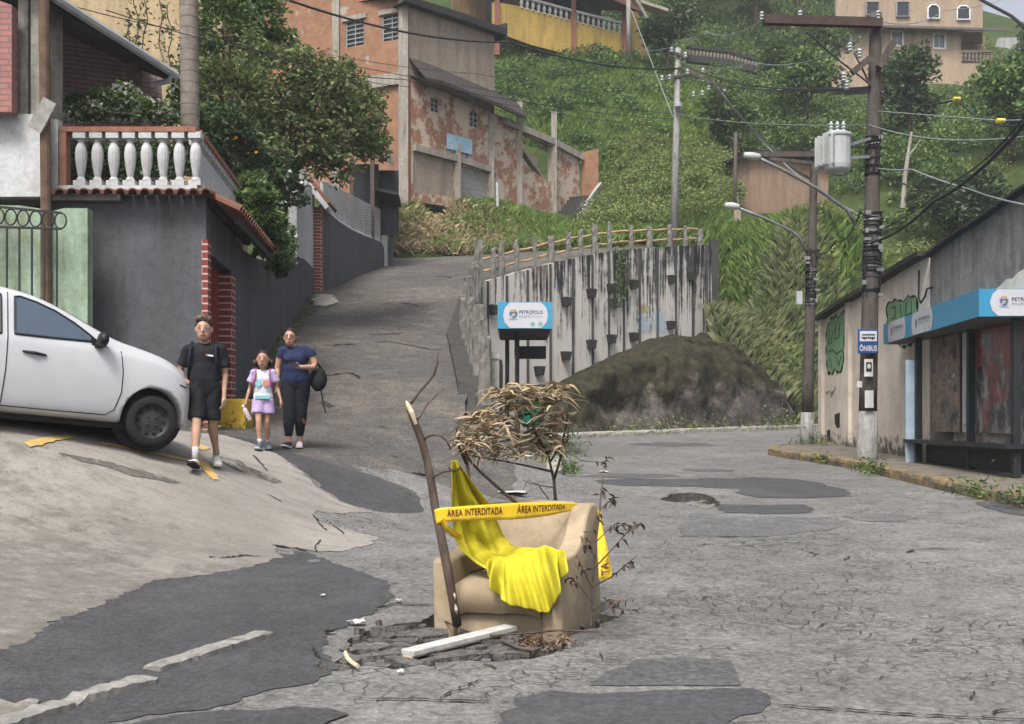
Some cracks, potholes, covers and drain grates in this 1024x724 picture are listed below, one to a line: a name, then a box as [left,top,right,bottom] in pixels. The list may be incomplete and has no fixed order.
pothole [313,614,619,671]
pothole [661,492,721,509]
crack [204,515,344,557]
